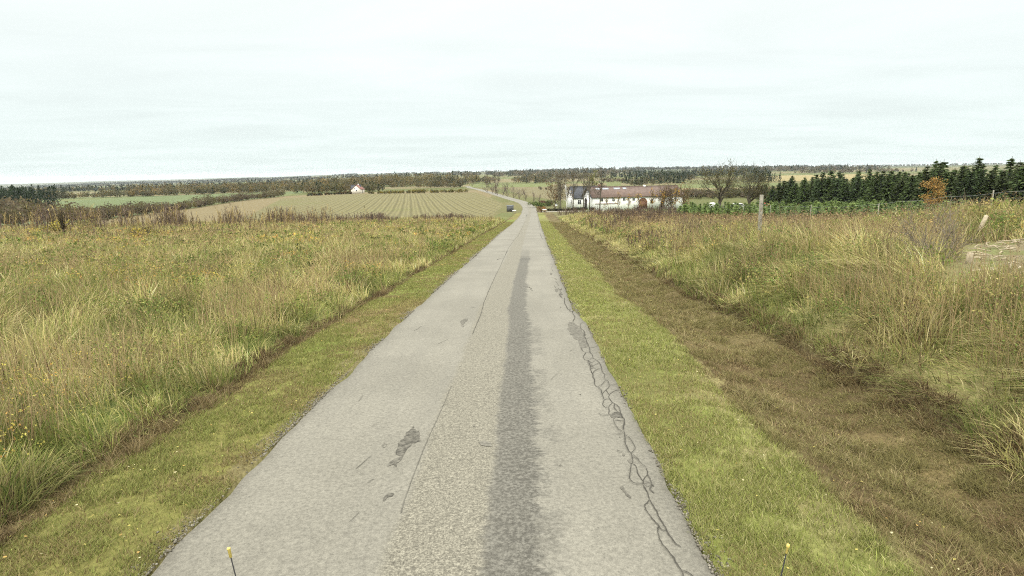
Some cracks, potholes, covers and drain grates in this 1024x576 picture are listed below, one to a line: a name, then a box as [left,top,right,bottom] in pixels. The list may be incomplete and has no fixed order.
pothole [396,426,421,456]
crack [557,283,693,576]
